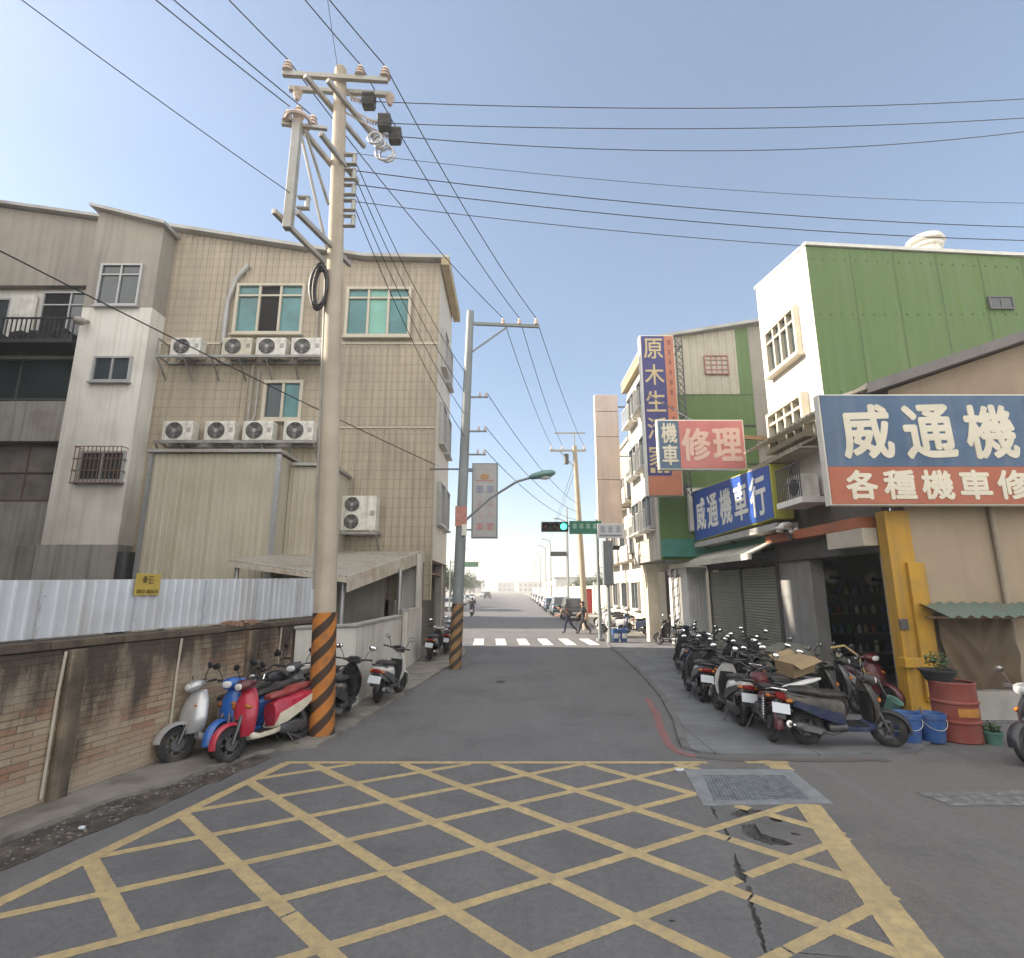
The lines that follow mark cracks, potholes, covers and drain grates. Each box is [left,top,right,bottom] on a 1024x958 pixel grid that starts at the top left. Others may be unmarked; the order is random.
crack [710,806,854,958]
pothole [741,824,792,846]
drain grate [684,769,833,807]
